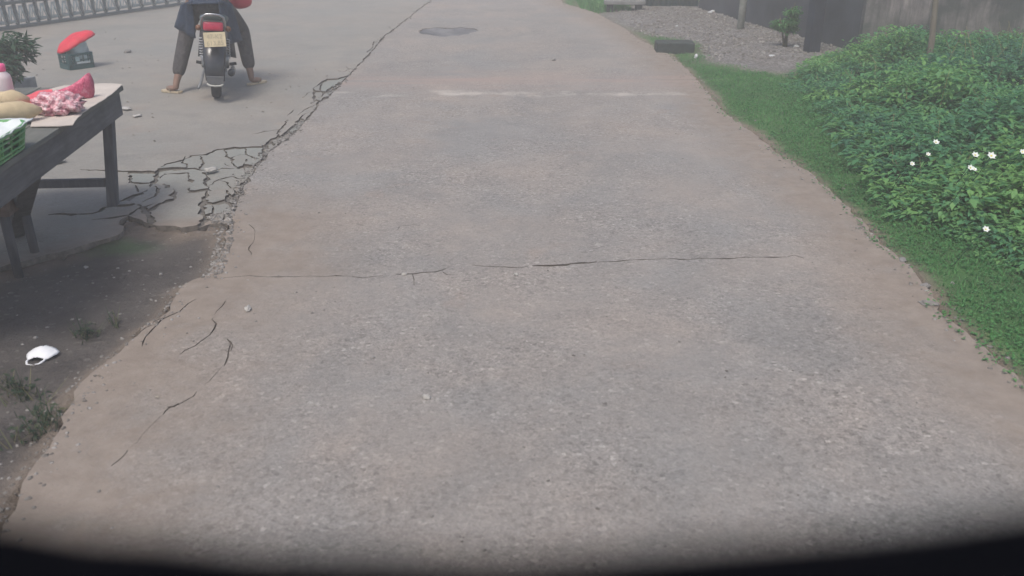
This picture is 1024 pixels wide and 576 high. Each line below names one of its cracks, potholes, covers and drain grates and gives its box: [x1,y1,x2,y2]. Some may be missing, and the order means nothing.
crack [215,255,803,285]
crack [111,305,233,466]
